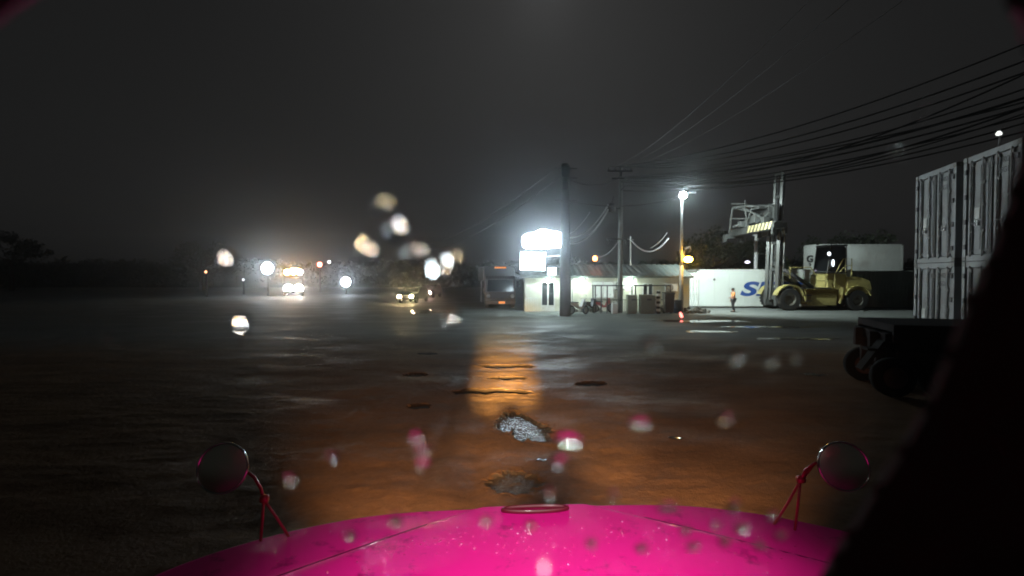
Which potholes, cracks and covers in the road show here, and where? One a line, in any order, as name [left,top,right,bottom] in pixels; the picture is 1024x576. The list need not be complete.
pothole [477,467,553,498]
pothole [485,407,563,447]
